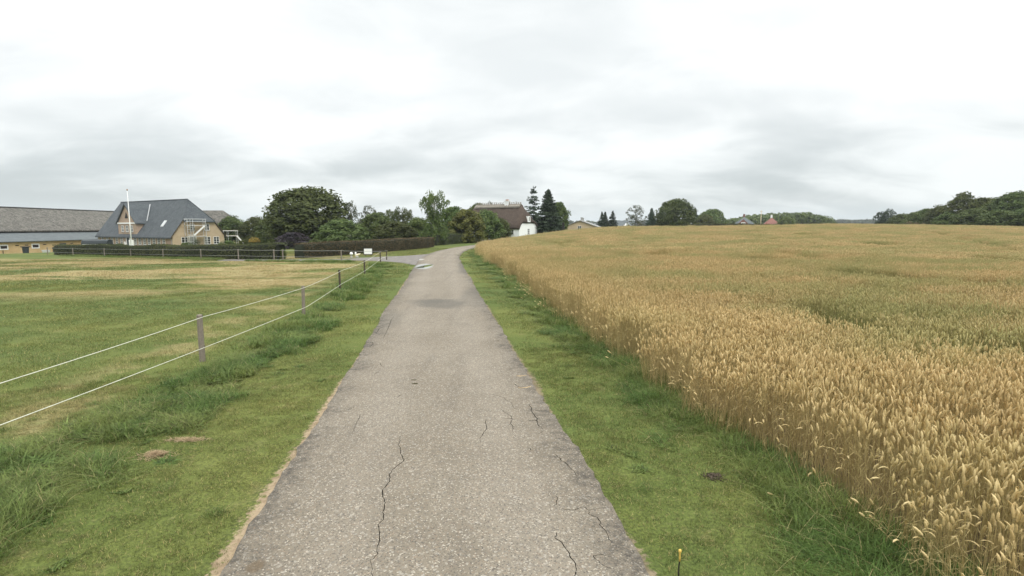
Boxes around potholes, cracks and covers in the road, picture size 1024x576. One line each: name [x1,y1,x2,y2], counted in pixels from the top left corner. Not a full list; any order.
crack [555,496,613,576]
crack [370,439,405,576]
crack [480,375,543,451]
